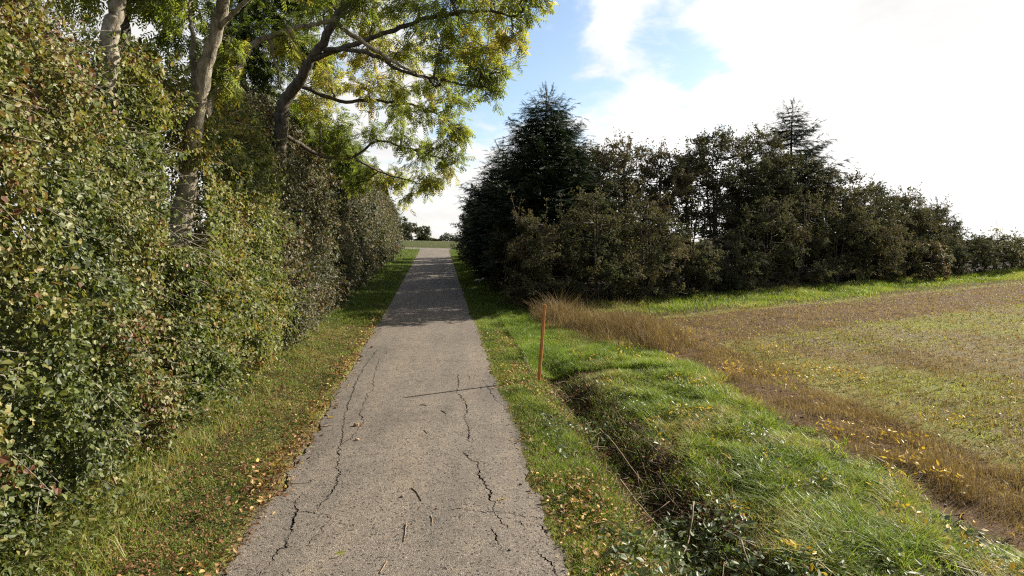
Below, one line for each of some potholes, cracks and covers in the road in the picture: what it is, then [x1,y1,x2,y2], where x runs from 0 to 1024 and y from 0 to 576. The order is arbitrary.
crack [452,374,558,576]
crack [259,352,387,576]
